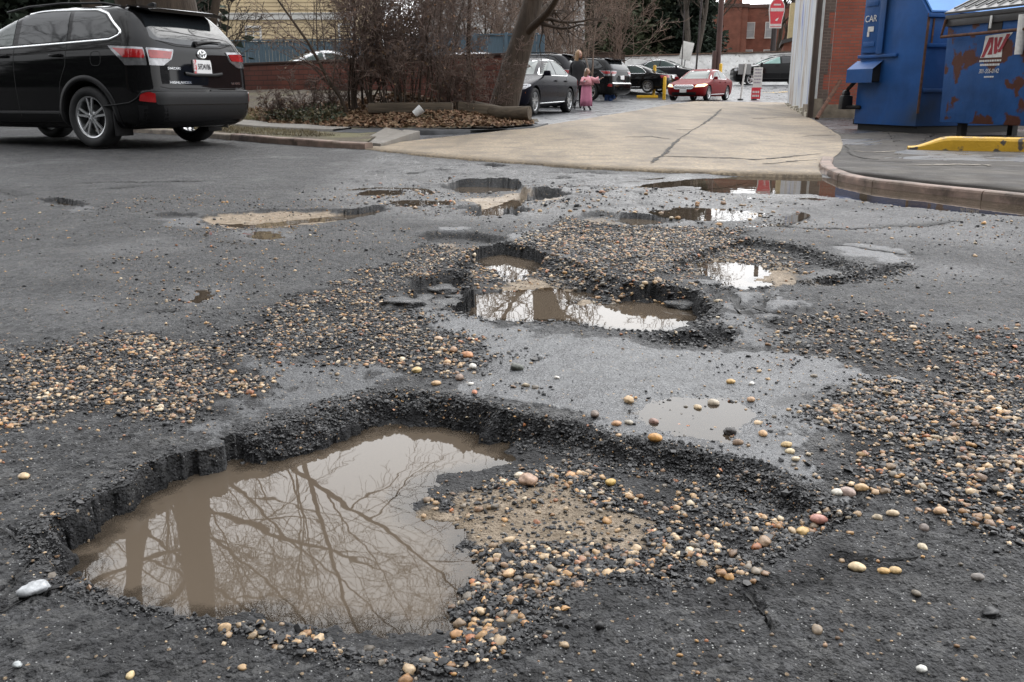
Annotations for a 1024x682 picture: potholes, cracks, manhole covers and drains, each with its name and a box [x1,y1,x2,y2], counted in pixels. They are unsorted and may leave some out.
crack [734,587,775,633]
pothole [35,389,838,664]
pothole [527,186,573,201]
pothole [447,241,714,333]
pothole [192,205,394,230]
pothole [438,177,540,216]
crack [643,109,811,164]
pothole [569,210,686,226]
pothole [671,238,869,290]
